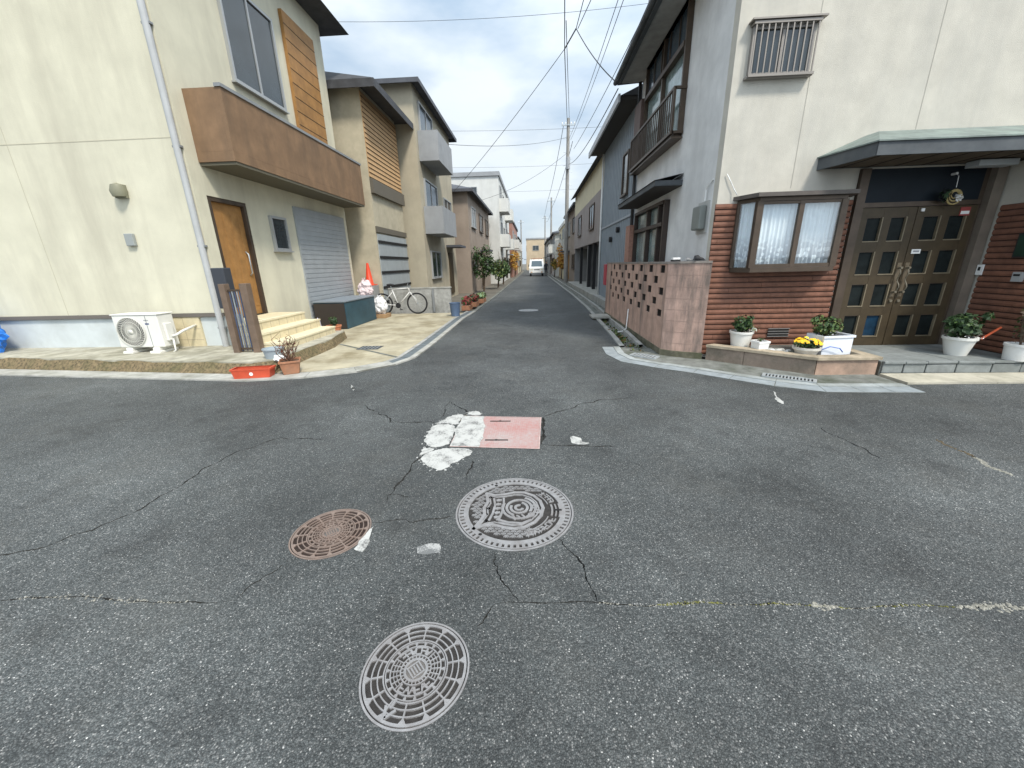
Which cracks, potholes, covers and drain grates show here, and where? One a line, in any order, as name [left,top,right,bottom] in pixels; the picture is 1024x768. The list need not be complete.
crack [556,537,597,601]
crack [493,552,518,599]
manhole cover [359,622,470,732]
crack [0,437,321,556]
crack [365,402,482,523]
manhole cover [456,478,574,551]
crack [540,397,630,447]
crack [936,439,1013,476]
drain grate [761,373,817,383]
manhole cover [288,509,372,560]
